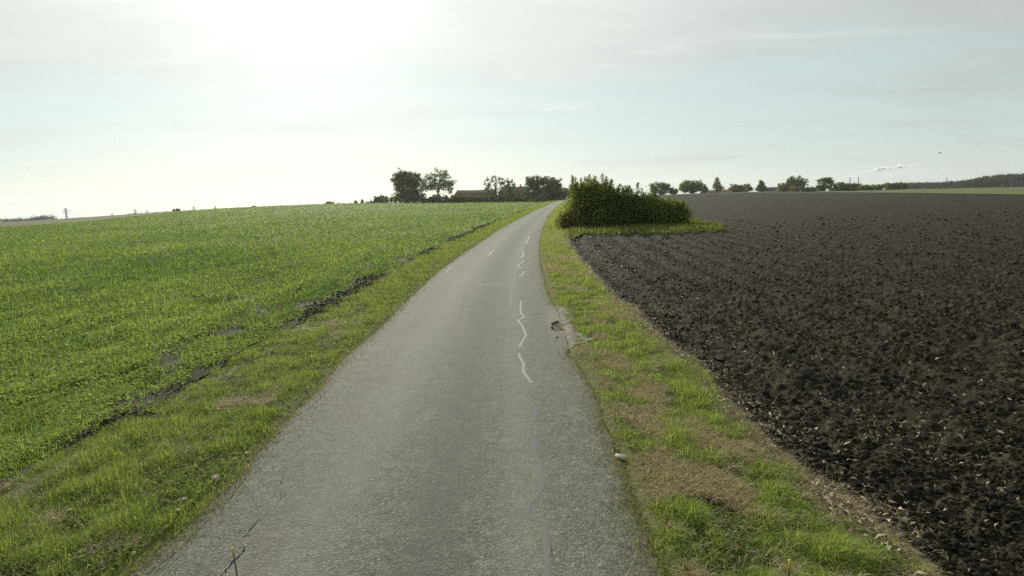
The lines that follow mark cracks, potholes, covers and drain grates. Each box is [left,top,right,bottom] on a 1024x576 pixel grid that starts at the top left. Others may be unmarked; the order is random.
crack [221,517,261,576]
